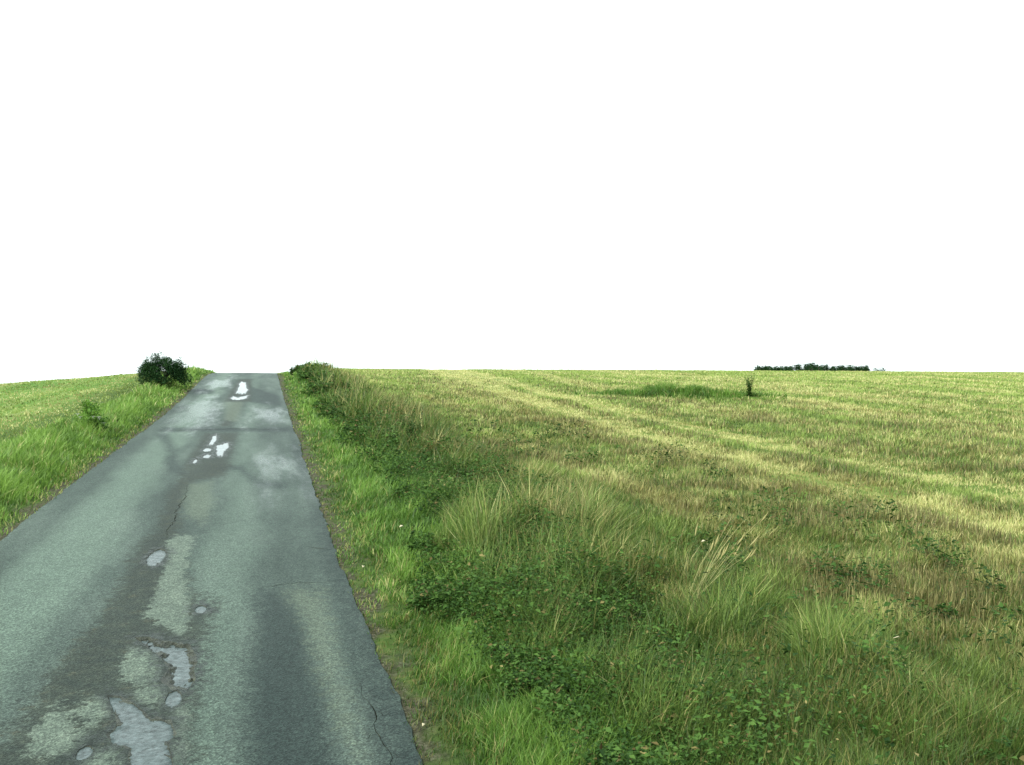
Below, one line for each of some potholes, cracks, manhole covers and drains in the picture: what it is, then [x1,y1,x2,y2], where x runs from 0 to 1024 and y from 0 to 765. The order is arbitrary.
pothole [164,690,182,709]
pothole [75,745,94,760]
pothole [135,637,198,691]
